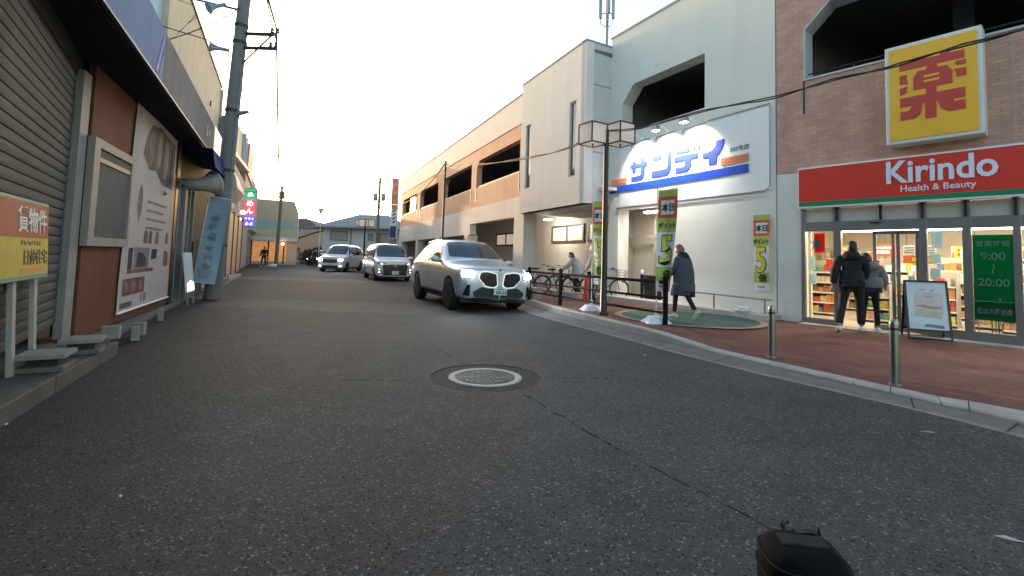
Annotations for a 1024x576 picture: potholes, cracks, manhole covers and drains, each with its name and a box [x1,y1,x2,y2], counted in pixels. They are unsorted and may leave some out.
crack [434,346,773,530]
manhole cover [448,368,522,387]
